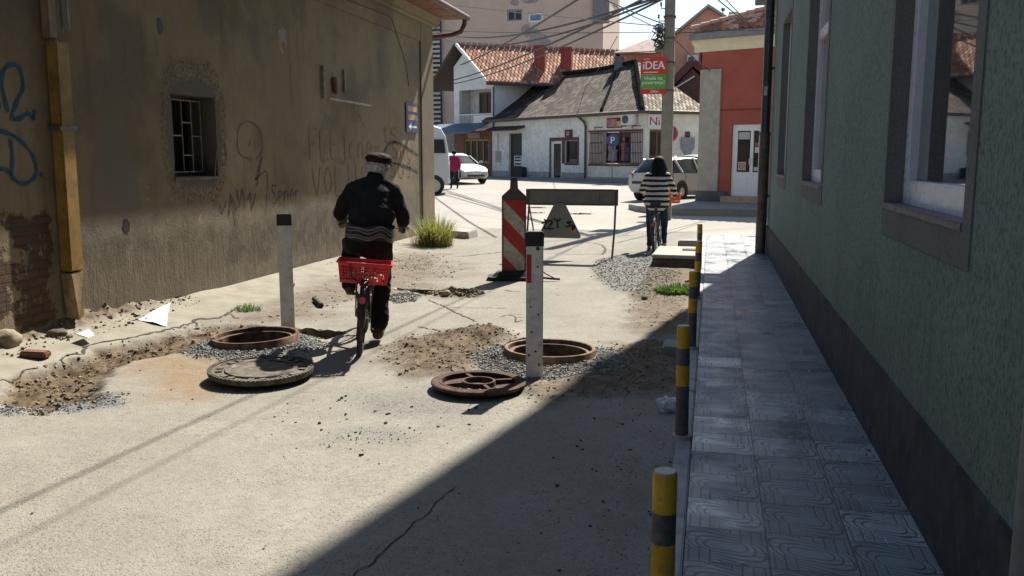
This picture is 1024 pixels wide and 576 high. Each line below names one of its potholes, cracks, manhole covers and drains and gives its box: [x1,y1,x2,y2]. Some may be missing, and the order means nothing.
crack [417,290,522,330]
manhole cover [207,354,314,388]
manhole cover [501,337,596,364]
manhole cover [431,370,526,397]
manhole cover [210,326,300,350]
crack [0,367,40,384]
crack [353,486,455,576]
crack [51,305,255,371]
